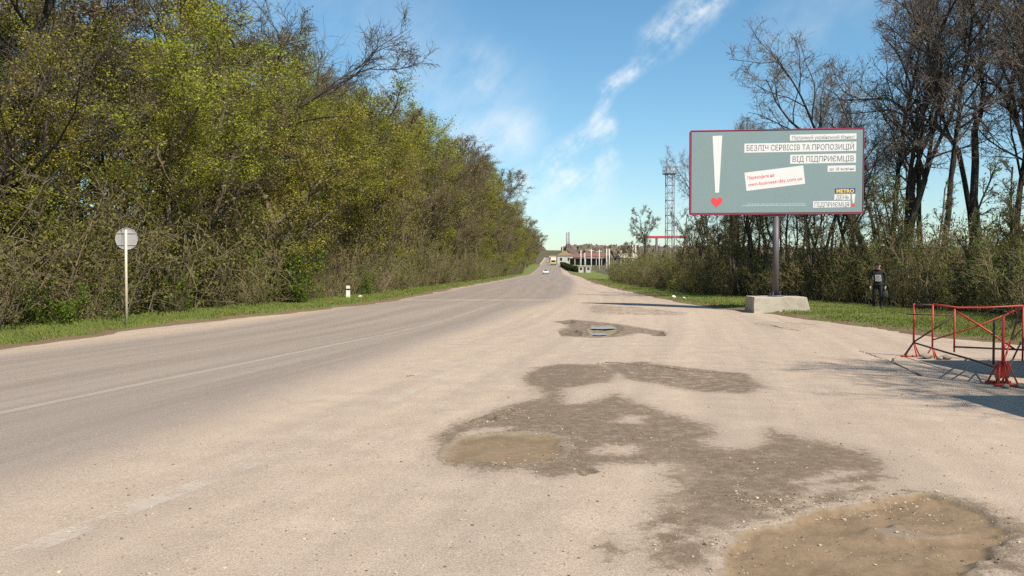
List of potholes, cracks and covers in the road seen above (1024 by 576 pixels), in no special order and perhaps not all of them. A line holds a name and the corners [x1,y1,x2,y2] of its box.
pothole [716,492,1022,576]
pothole [436,430,579,465]
